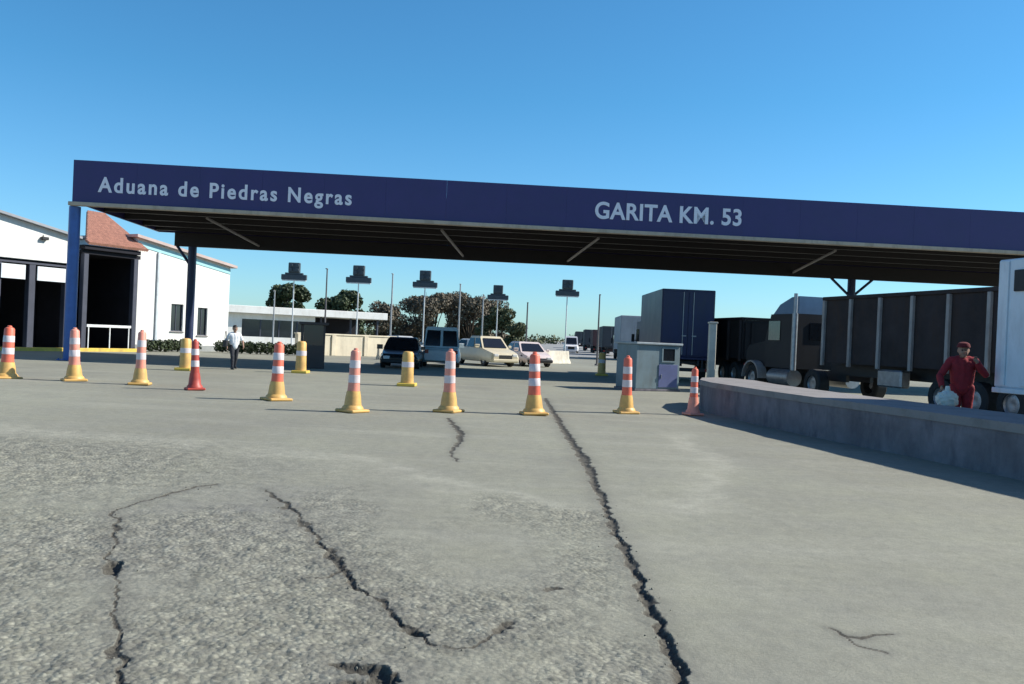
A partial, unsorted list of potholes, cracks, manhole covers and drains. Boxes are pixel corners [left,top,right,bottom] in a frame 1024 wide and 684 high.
crack [829,628,894,654]
crack [445,418,465,462]
crack [102,484,218,684]
crack [264,490,494,650]
crack [542,398,693,684]
